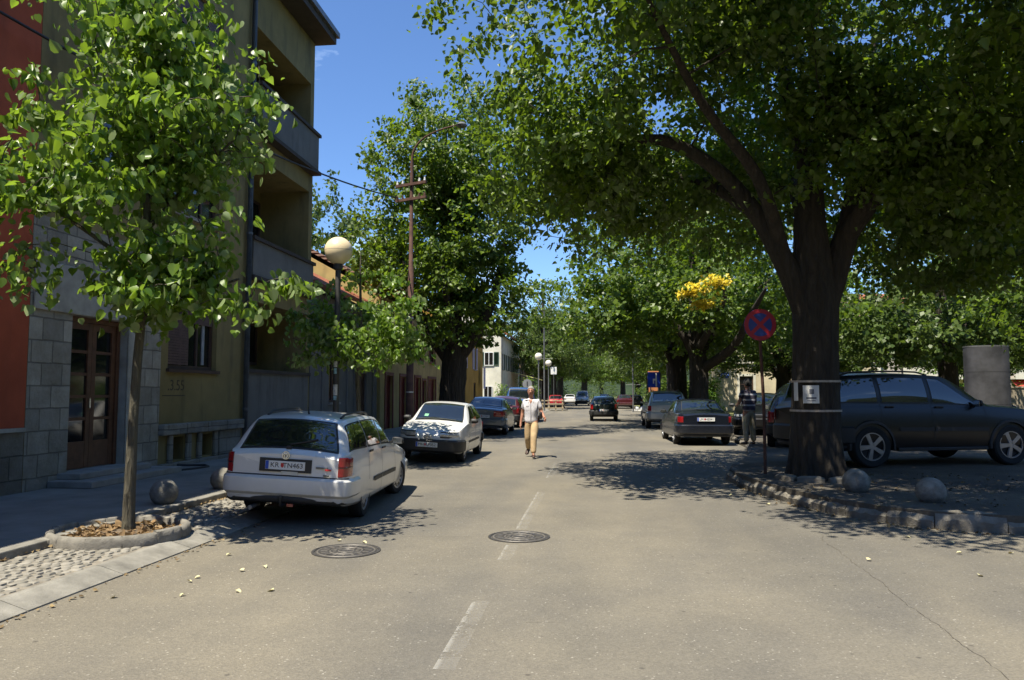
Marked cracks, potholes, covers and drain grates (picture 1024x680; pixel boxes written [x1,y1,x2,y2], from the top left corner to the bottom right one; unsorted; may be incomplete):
crack [822,538,1009,680]
manhole cover [311,543,381,558]
manhole cover [488,531,550,543]
